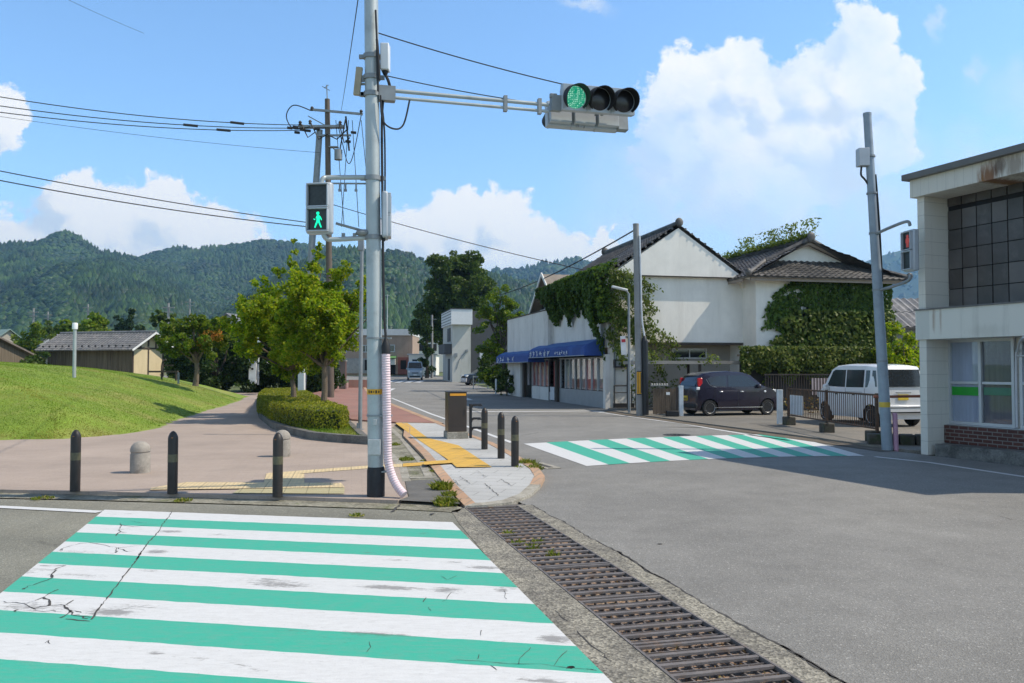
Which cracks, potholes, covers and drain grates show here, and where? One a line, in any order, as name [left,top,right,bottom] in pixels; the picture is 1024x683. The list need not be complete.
crack [4,512,172,621]
drain grate [483,520,570,543]
drain grate [538,563,660,604]
drain grate [508,539,610,571]
drain grate [578,594,730,648]
drain grate [633,637,806,683]
drain grate [465,505,541,525]
